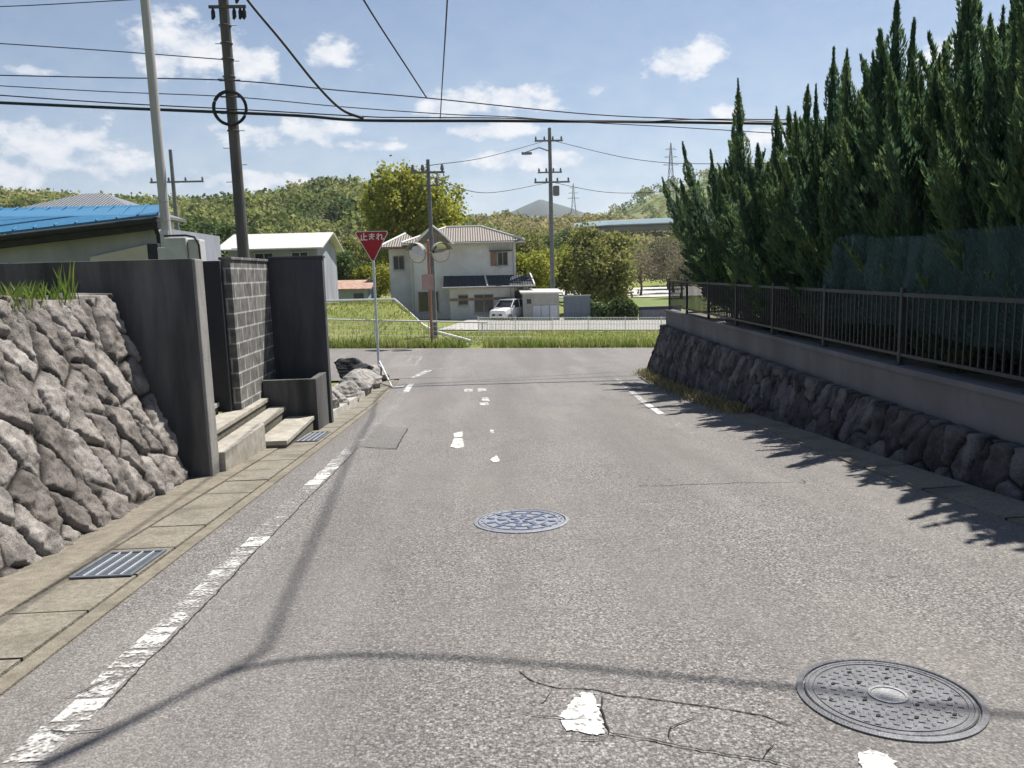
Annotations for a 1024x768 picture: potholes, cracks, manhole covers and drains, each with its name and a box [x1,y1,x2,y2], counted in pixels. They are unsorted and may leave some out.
drain grate [69,549,167,579]
manhole cover [474,509,569,534]
drain grate [295,431,331,442]
manhole cover [796,658,990,743]
crack [518,670,796,768]
